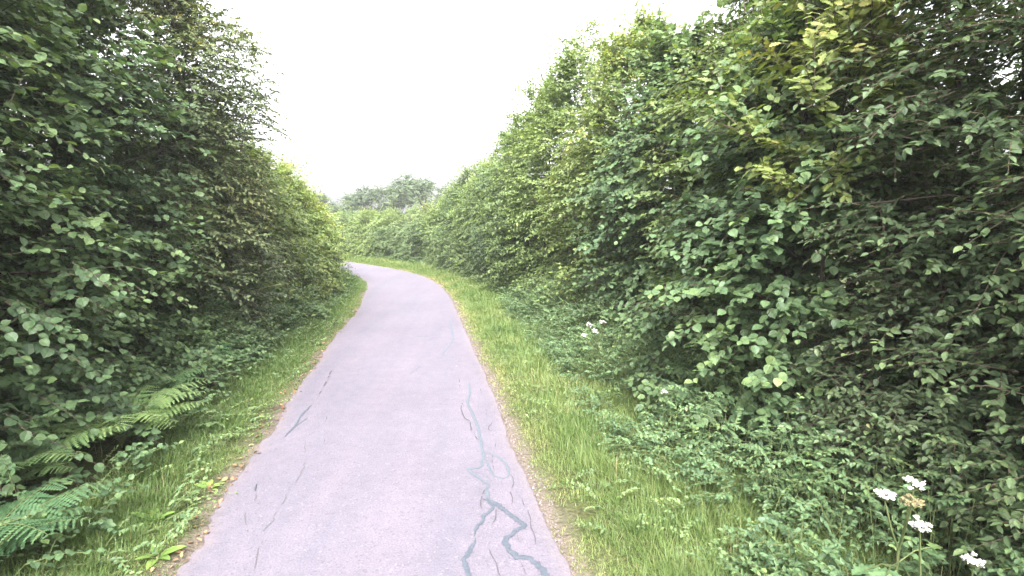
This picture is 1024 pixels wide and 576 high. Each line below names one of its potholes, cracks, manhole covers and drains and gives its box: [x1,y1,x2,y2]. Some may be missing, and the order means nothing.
crack [237,440,306,576]
